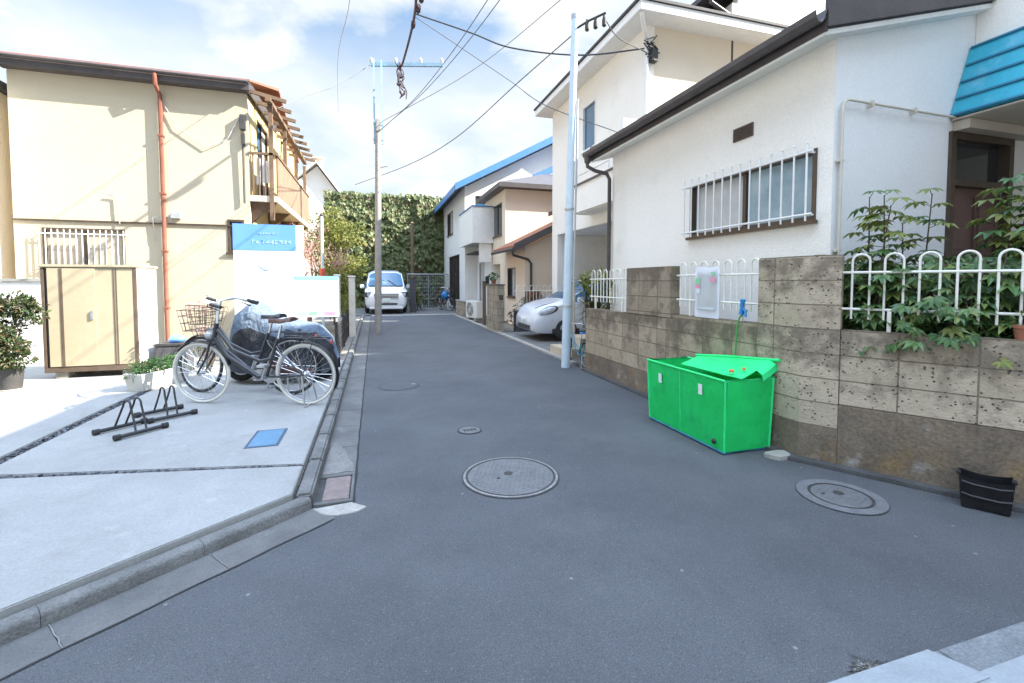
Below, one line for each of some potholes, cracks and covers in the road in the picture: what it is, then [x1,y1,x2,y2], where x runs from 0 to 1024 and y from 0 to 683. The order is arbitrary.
manhole cover [378,381,419,390]
manhole cover [457,426,482,434]
manhole cover [795,479,890,515]
manhole cover [461,457,560,499]
crack [48,624,64,648]
